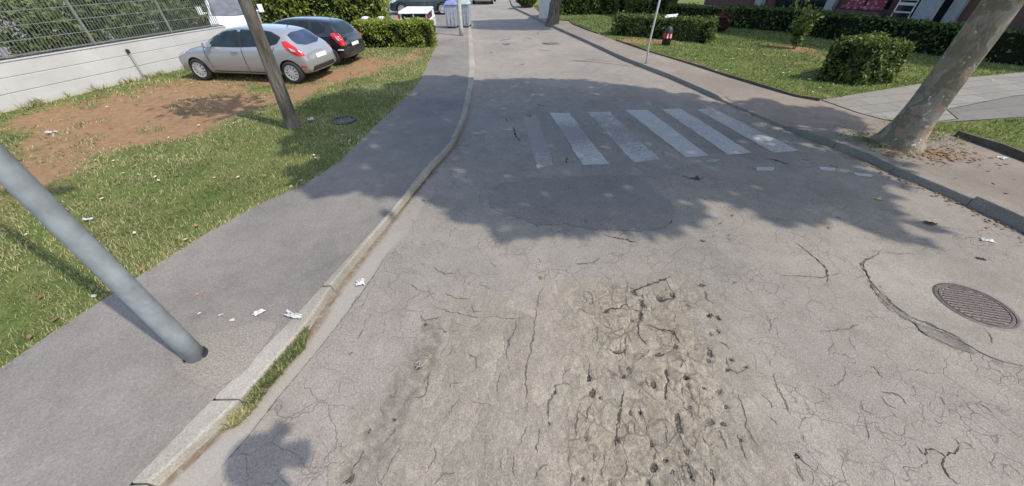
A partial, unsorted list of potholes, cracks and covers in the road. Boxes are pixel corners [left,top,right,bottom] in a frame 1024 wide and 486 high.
crack [788,246,836,283]
crack [861,252,966,353]
manhole cover [330,116,357,125]
crack [412,285,544,413]
crack [903,422,997,483]
crack [521,277,809,485]
crack [861,366,906,439]
manhole cover [932,283,1022,331]
